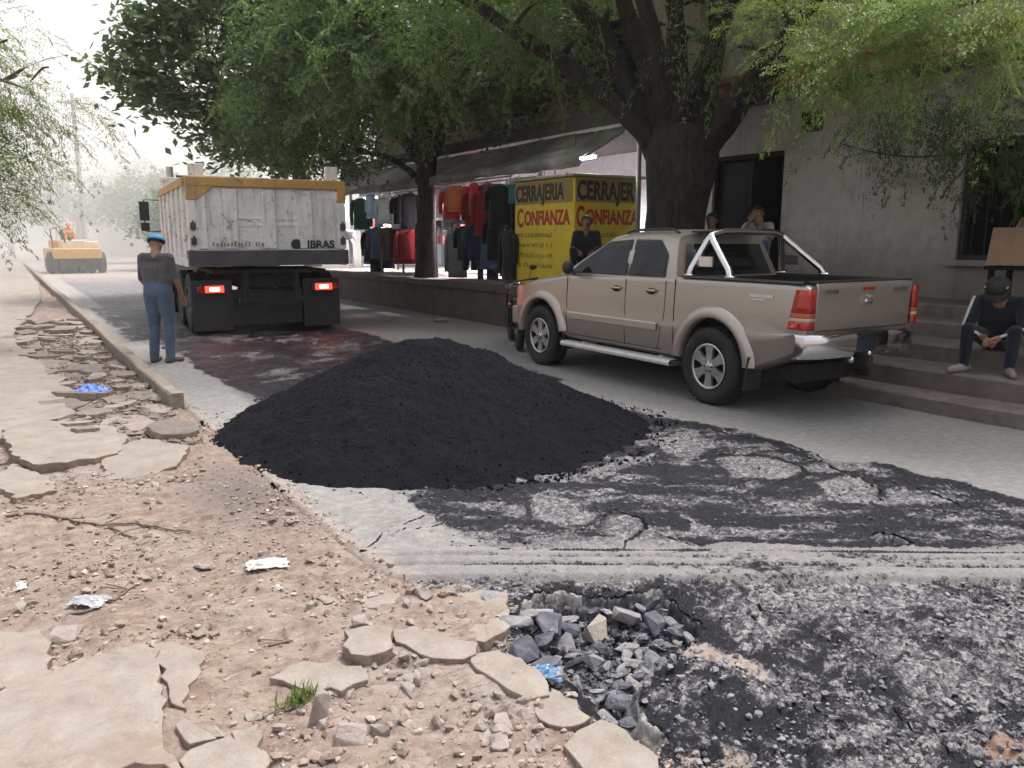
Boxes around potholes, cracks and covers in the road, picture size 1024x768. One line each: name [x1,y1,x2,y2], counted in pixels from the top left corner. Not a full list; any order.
crack [359,513,563,551]
pothole [517,586,705,754]
crack [584,507,704,551]
crack [679,426,1008,517]
